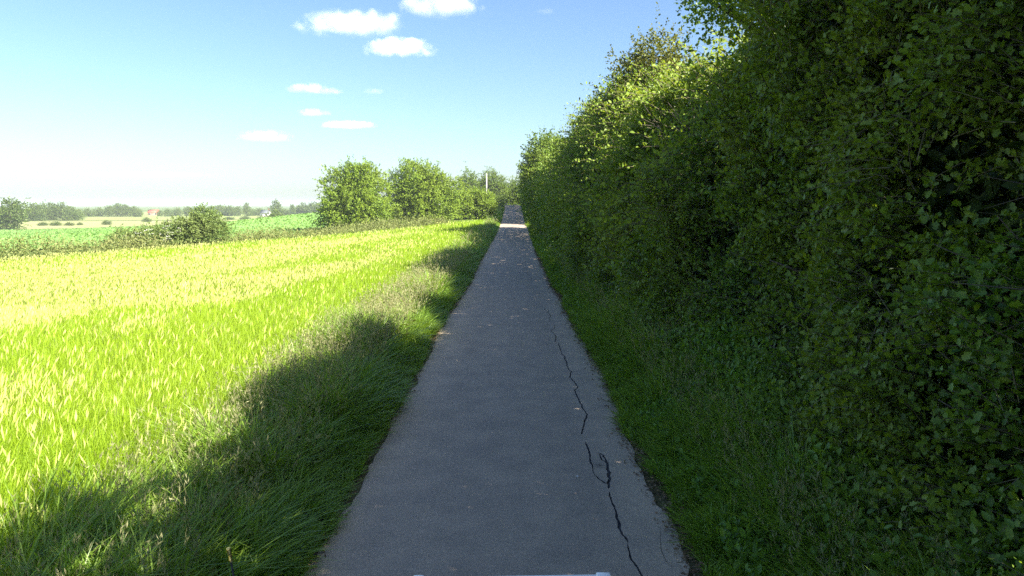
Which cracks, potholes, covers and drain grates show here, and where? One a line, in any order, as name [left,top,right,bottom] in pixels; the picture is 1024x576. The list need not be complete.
crack [544,308,643,576]
